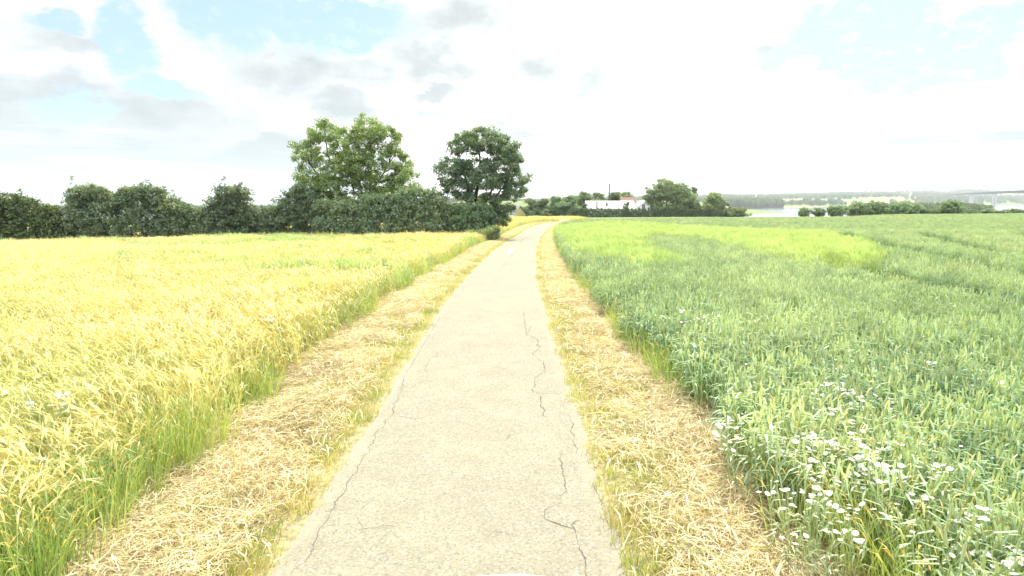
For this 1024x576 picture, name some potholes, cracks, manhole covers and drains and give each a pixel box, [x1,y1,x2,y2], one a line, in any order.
crack [290,320,473,576]
crack [544,422,587,575]
